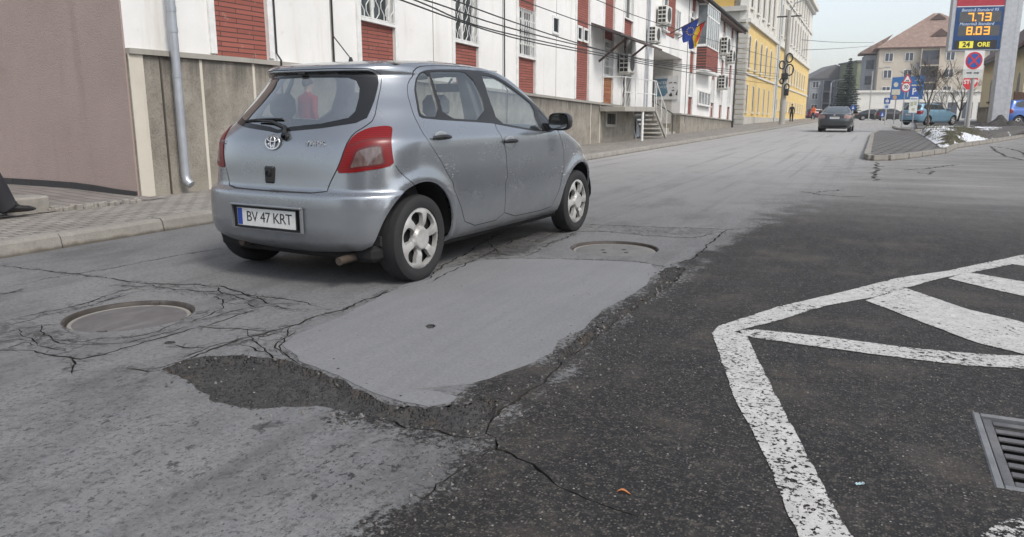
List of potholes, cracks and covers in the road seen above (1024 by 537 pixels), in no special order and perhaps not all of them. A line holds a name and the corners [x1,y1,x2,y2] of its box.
crack [870,162,885,181]
crack [990,146,1024,160]
crack [0,251,405,373]
manhole cover [60,300,195,332]
manhole cover [570,241,659,256]
drain grate [972,412,1024,492]
crack [430,224,742,279]
pothole [163,355,497,431]
